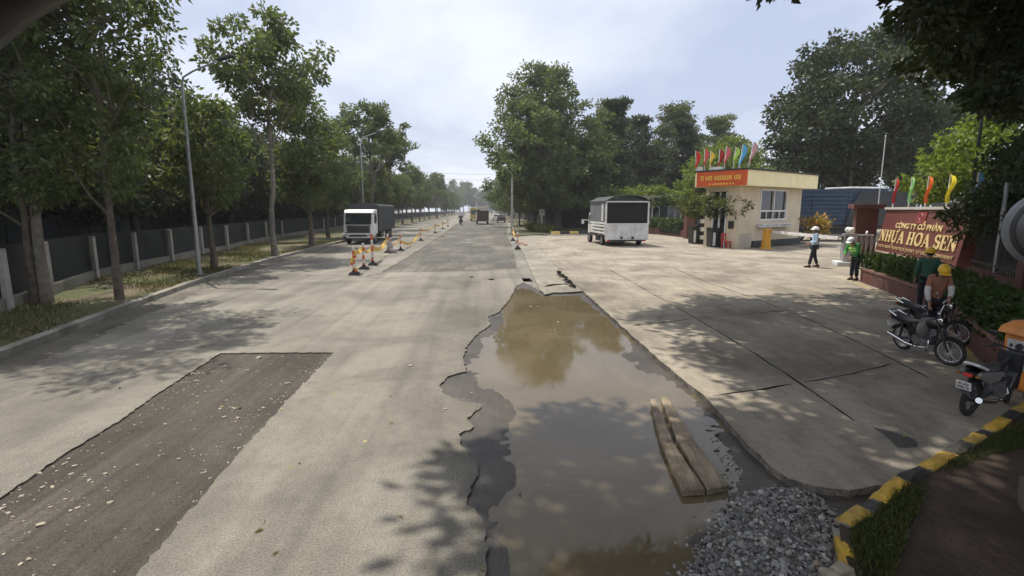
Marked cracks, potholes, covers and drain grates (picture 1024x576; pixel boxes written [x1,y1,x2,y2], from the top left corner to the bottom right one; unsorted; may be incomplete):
crack [544,270,576,289]
pothole [439,283,878,576]
